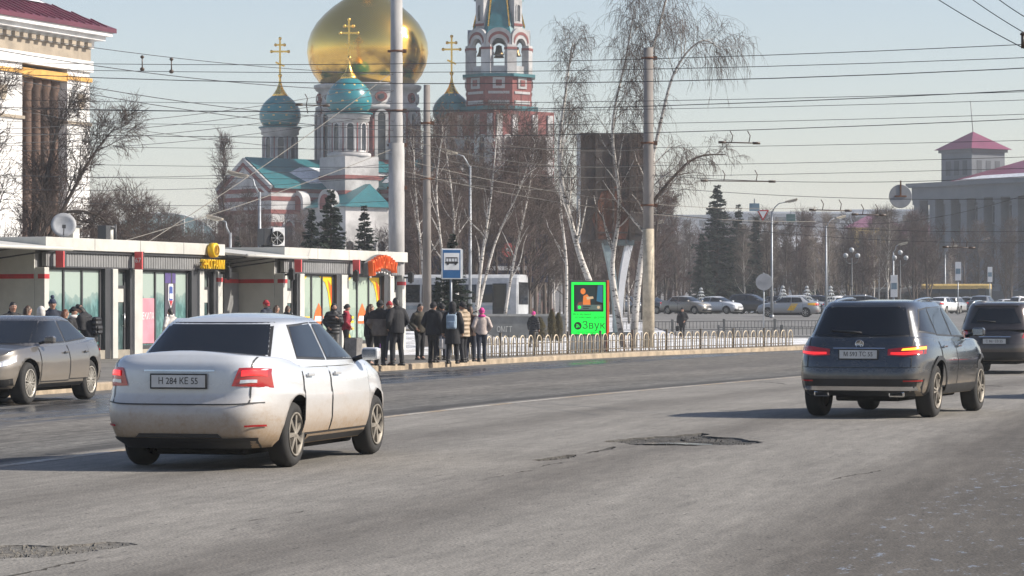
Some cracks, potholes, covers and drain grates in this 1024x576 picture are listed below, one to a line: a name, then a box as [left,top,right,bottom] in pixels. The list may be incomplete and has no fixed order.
crack [10,560,86,576]
pothole [604,433,761,446]
pothole [0,542,137,559]
